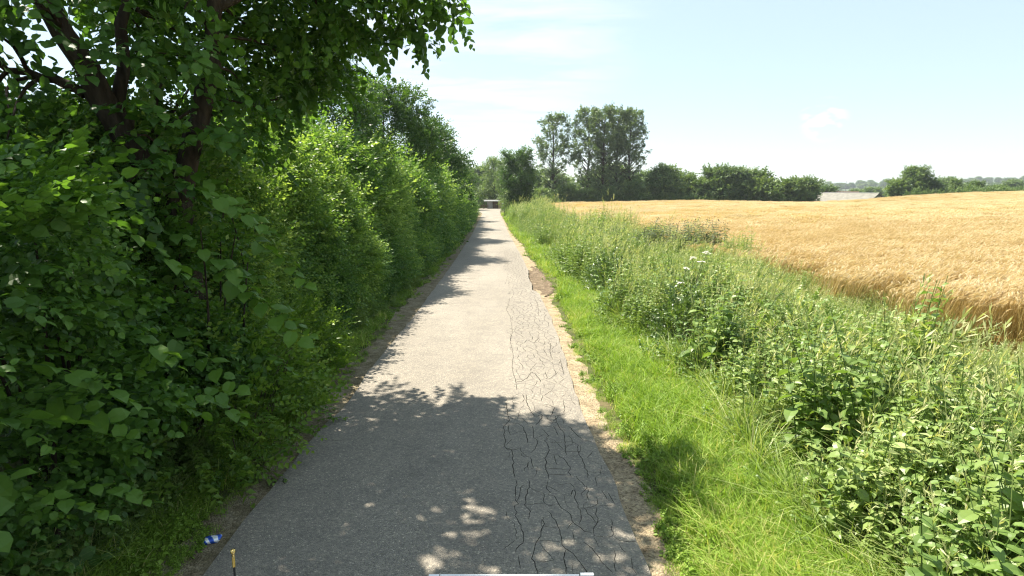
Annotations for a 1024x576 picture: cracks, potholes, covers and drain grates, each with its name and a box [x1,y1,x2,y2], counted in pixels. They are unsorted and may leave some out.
crack [502,249,635,574]
